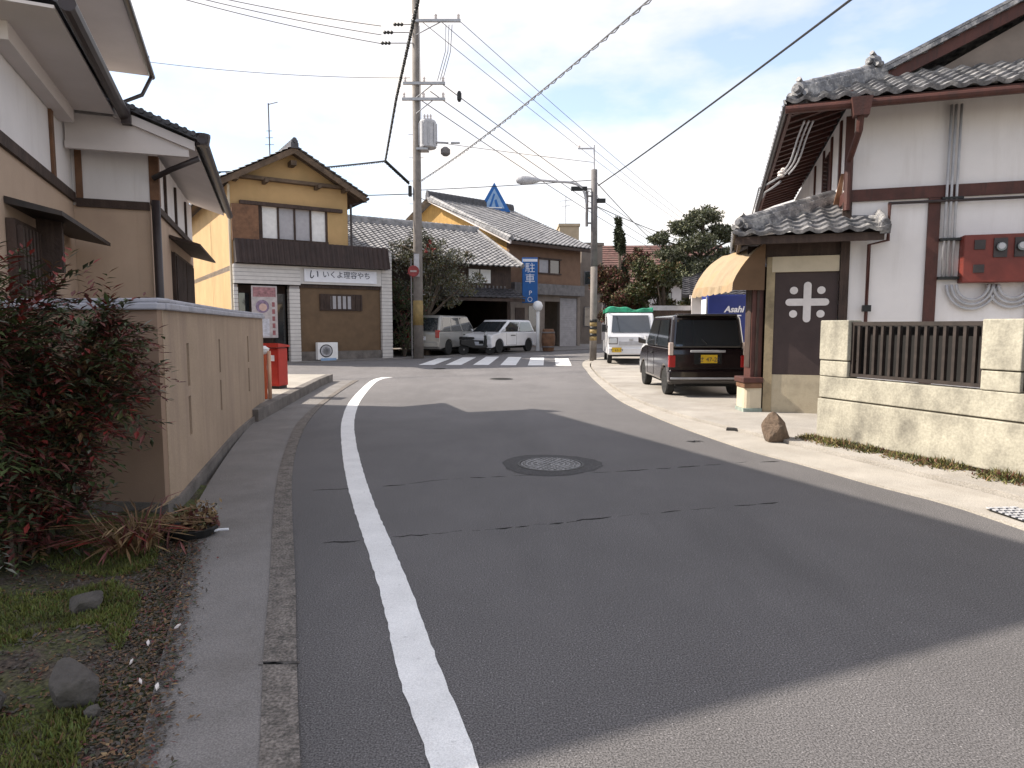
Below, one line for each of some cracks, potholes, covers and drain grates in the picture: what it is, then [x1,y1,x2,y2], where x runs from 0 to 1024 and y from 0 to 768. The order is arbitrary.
crack [321,461,780,490]
crack [326,502,778,543]
manhole cover [502,455,603,476]
drain grate [986,506,1024,522]
